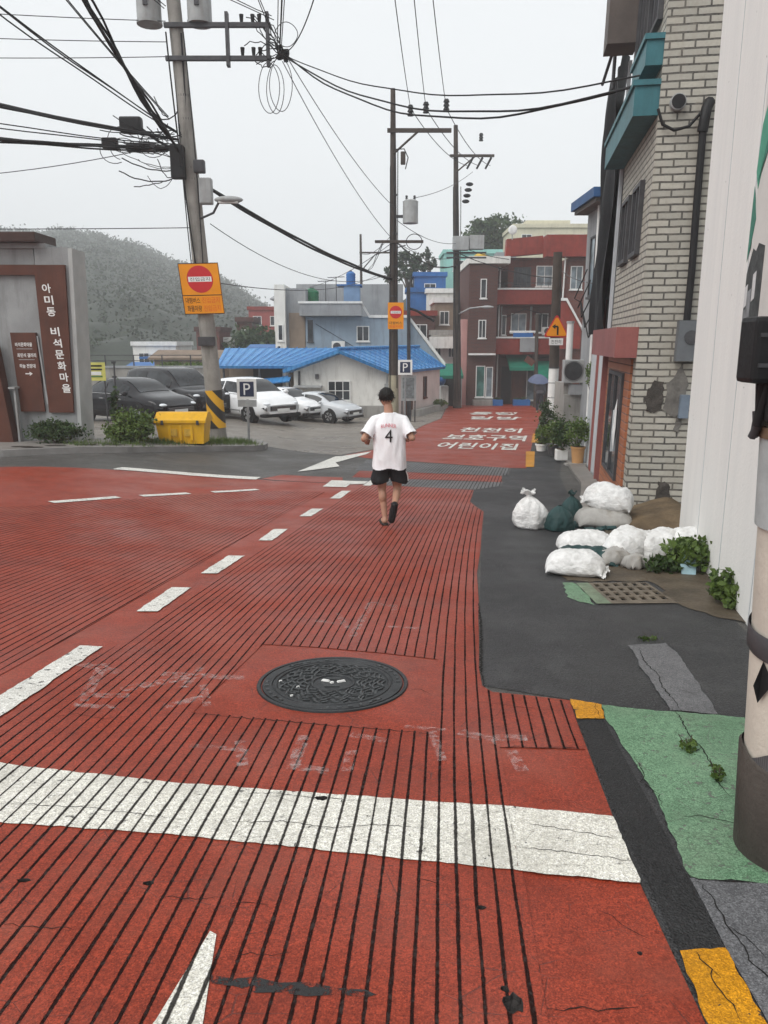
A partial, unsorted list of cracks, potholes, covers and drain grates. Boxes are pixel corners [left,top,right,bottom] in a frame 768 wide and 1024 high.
manhole cover [256,657,408,713]
pothole [502,992,523,1014]
crack [640,650,730,796]
crack [696,882,768,1019]
drain grate [577,582,677,604]
